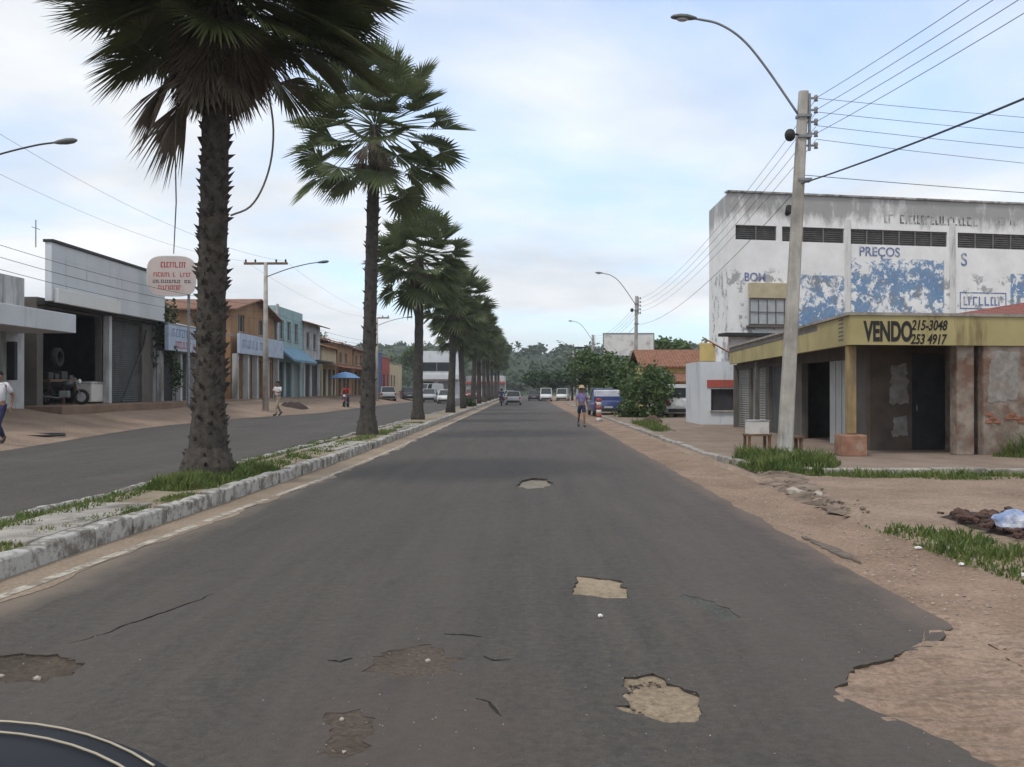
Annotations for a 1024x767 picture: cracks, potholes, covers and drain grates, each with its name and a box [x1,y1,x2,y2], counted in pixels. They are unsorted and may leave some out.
pothole [572,576,629,598]
crack [71,594,211,643]
crack [476,698,502,716]
pothole [516,478,553,489]
pothole [0,653,85,684]
pothole [614,673,703,723]
